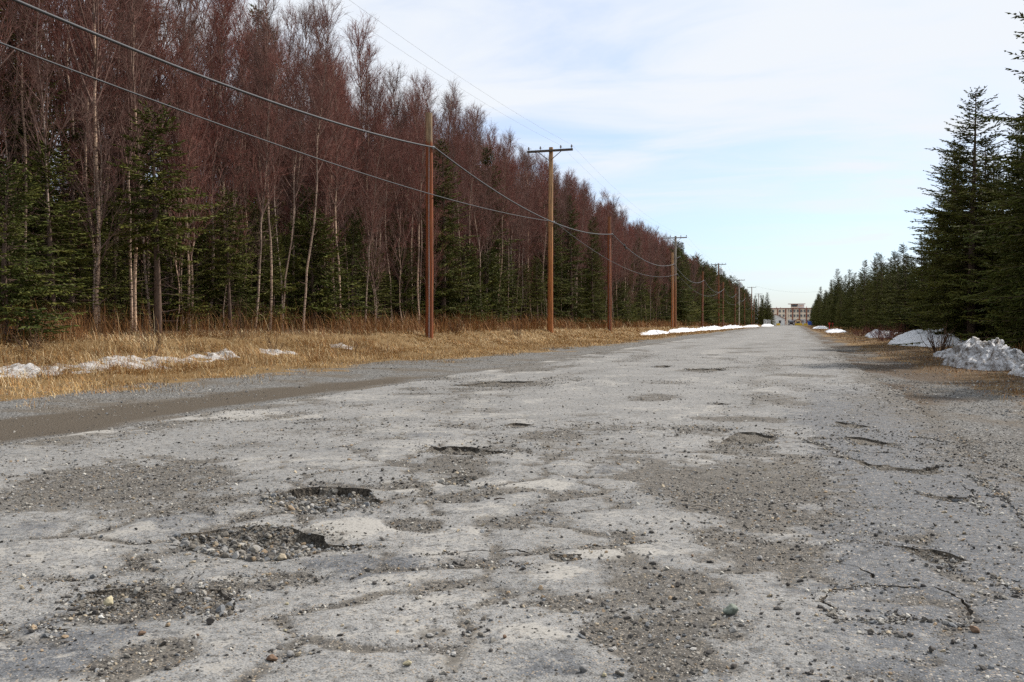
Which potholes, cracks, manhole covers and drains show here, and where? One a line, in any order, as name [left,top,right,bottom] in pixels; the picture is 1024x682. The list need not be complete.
pothole [204,588,236,618]
pothole [721,432,778,445]
pothole [426,445,512,456]
pothole [169,524,368,562]
pothole [73,587,148,616]
crack [819,562,973,637]
pothole [260,487,393,514]
